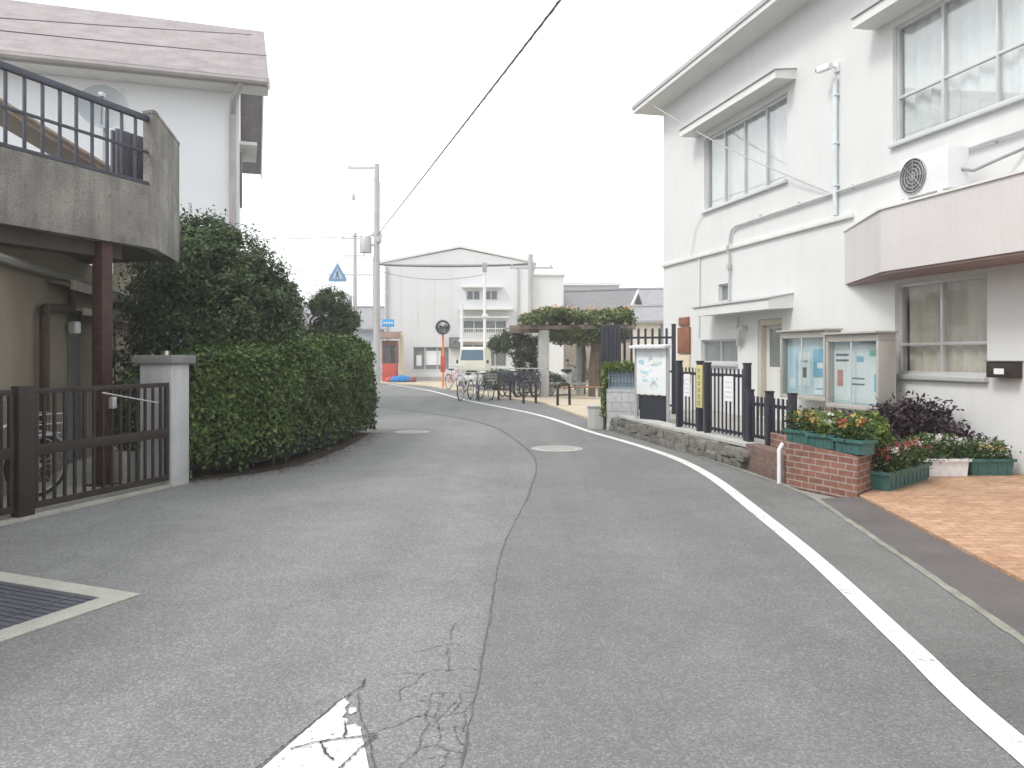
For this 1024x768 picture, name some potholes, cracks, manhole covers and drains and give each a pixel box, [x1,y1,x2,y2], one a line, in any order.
drain grate [0,572,141,643]
crack [256,623,477,768]
